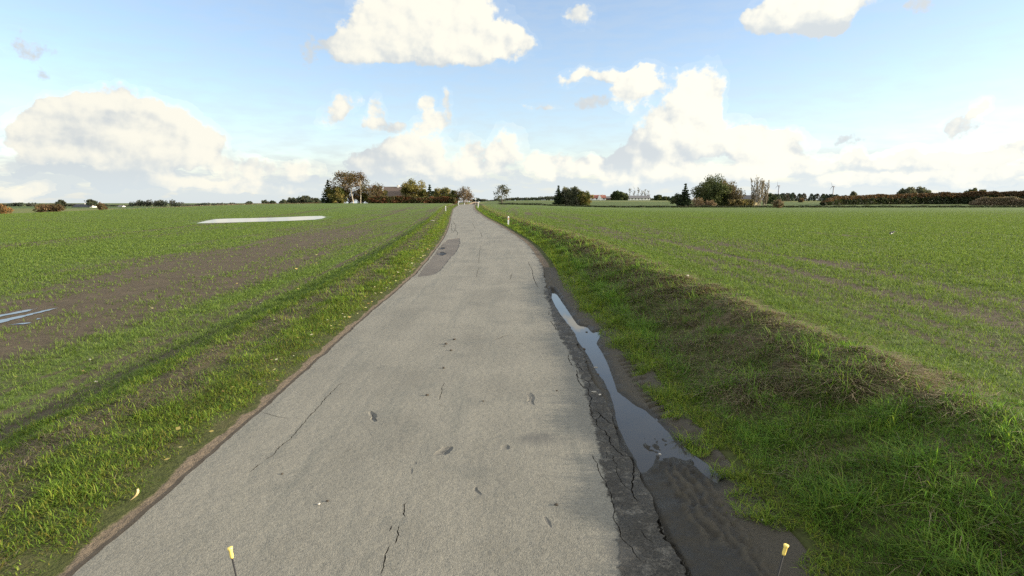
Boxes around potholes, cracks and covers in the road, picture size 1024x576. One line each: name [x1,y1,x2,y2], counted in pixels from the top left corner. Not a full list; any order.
crack [568,355,690,576]
crack [250,386,338,472]
crack [381,504,405,573]
pothole [434,446,453,455]
